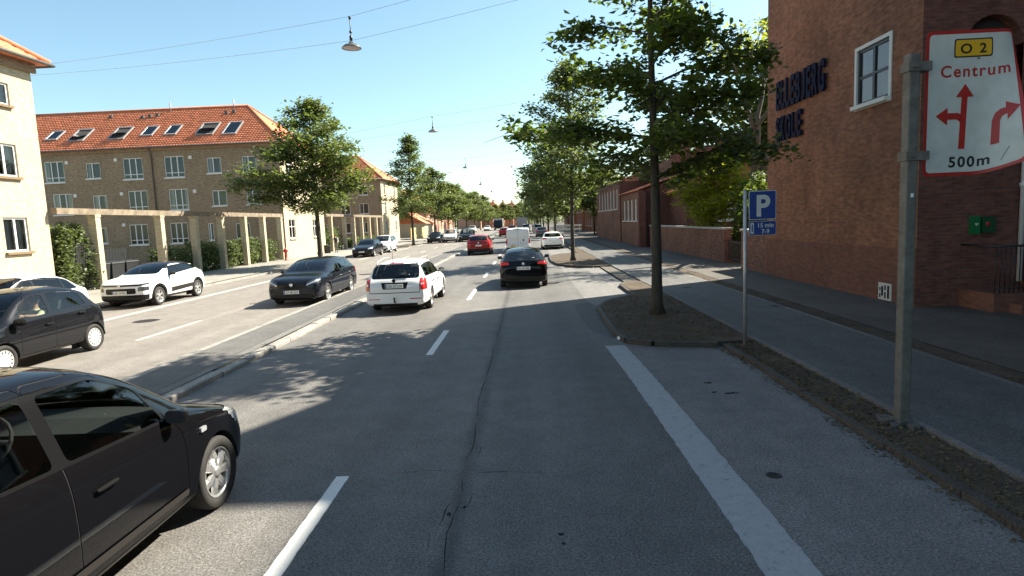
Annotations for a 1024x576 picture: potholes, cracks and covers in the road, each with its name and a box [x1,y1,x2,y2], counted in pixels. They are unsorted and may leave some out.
crack [402,315,538,566]
